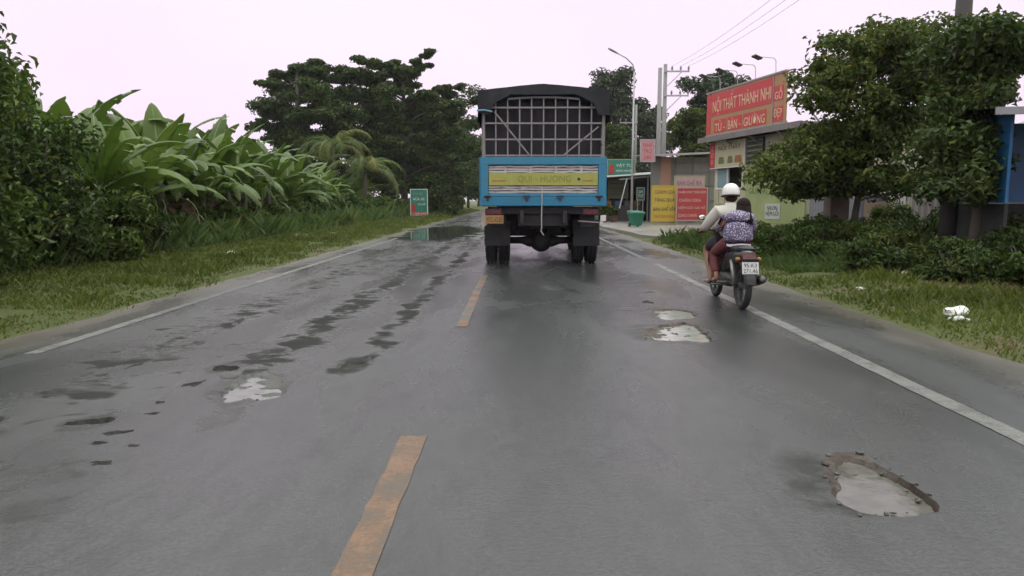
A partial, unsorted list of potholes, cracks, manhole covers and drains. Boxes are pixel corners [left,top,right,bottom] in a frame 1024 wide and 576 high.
pothole [218,370,287,403]
pothole [821,450,940,517]
pothole [648,308,698,320]
pothole [641,322,714,343]
